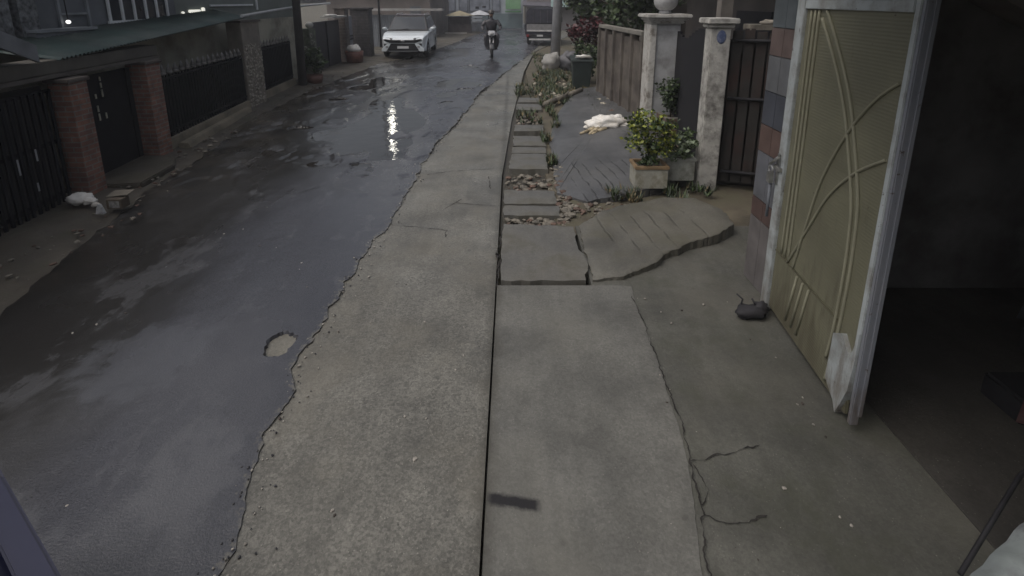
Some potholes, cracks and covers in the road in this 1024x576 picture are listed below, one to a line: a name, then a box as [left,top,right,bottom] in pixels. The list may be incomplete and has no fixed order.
crack [631,296,767,576]
pothole [254,325,308,363]
